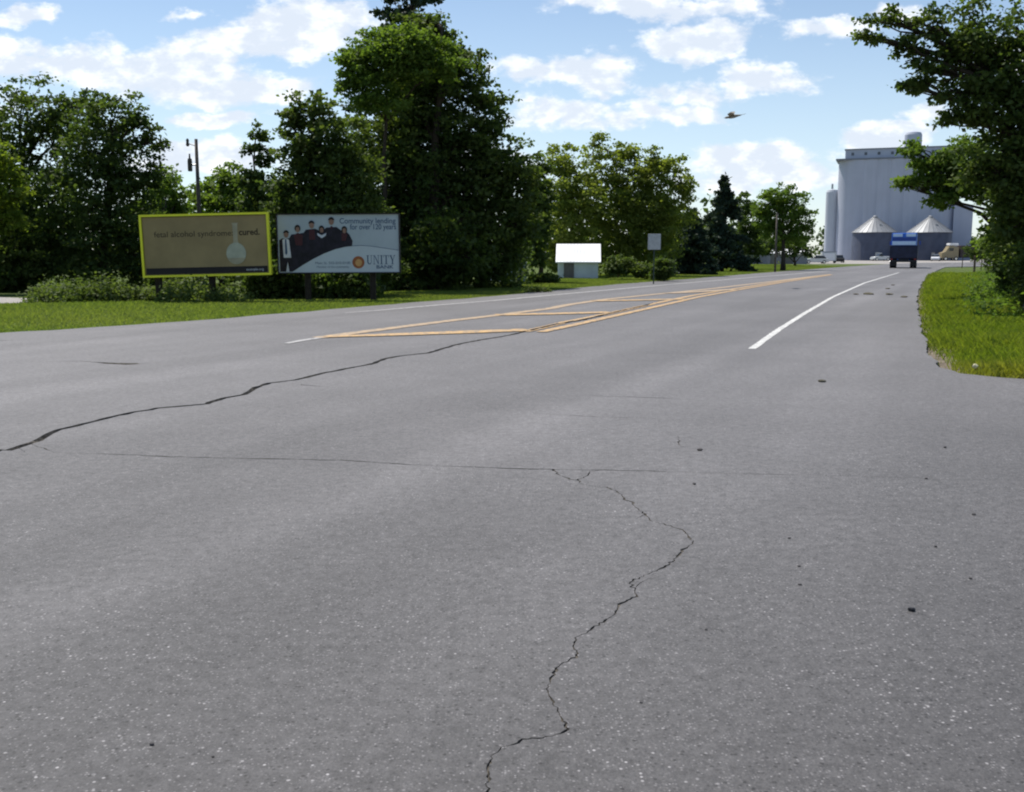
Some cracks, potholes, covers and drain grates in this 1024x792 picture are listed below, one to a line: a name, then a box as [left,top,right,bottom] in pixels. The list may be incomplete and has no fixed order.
crack [485,470,694,792]
crack [0,301,824,476]
